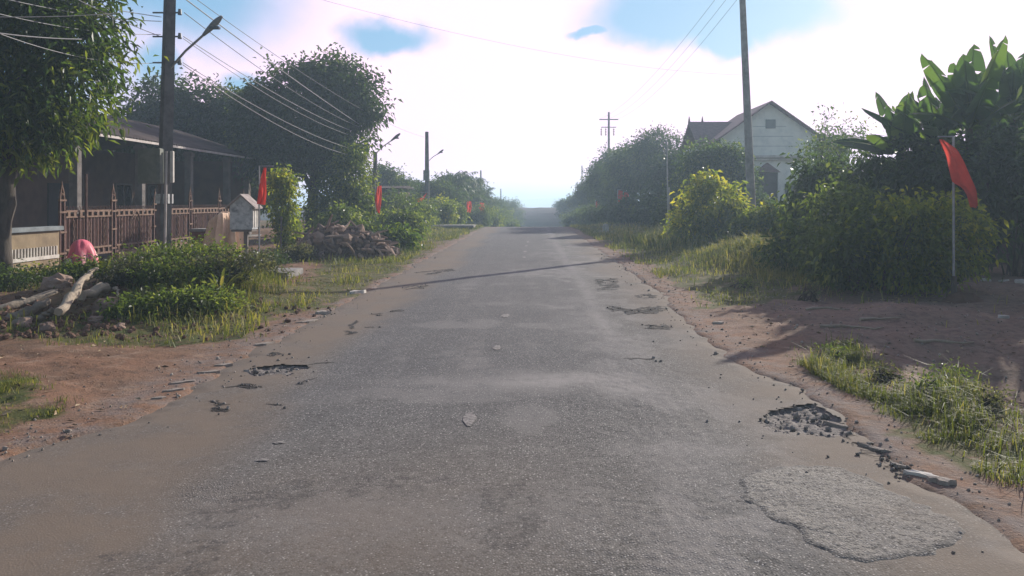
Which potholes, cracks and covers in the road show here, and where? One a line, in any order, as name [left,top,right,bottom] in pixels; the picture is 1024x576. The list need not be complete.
pothole [203,356,341,383]
